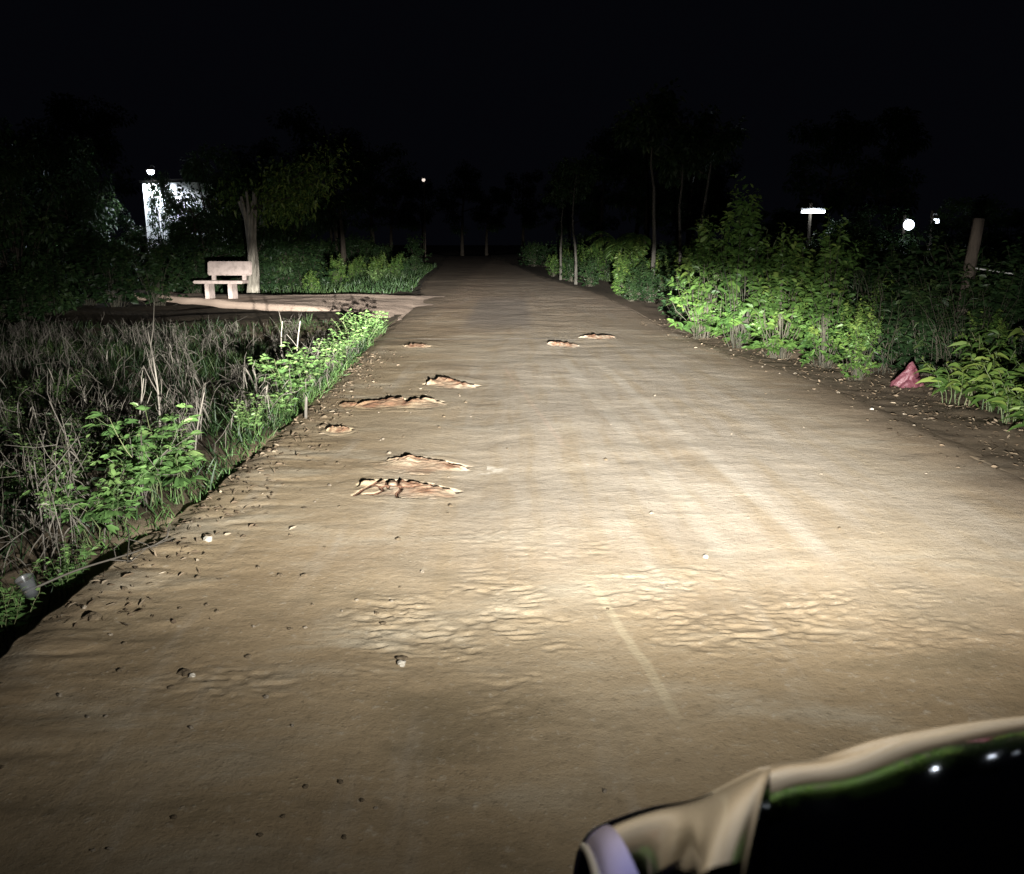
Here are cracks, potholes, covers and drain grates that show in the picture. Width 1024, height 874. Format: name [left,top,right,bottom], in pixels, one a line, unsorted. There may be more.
pothole [320,425,359,436]
pothole [538,341,586,349]
pothole [325,475,487,505]
pothole [409,376,494,392]
pothole [335,395,469,413]
pothole [349,454,487,479]
